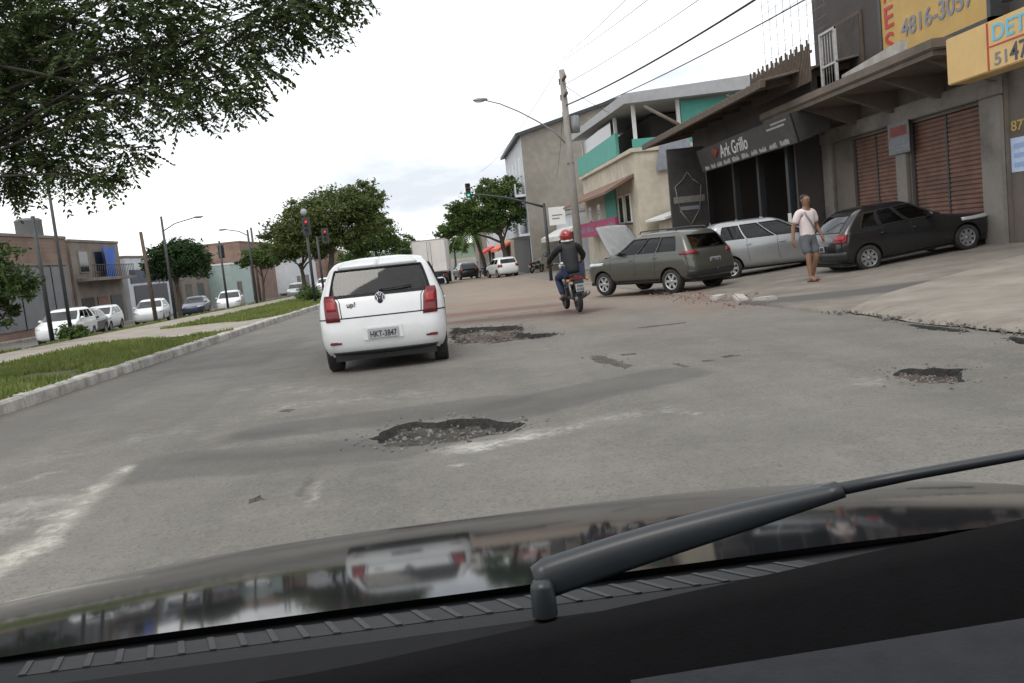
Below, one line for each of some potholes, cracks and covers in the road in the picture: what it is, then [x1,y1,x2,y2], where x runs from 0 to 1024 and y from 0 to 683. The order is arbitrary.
pothole [447,324,565,345]
pothole [873,363,1007,390]
pothole [581,354,637,369]
pothole [340,412,549,452]
